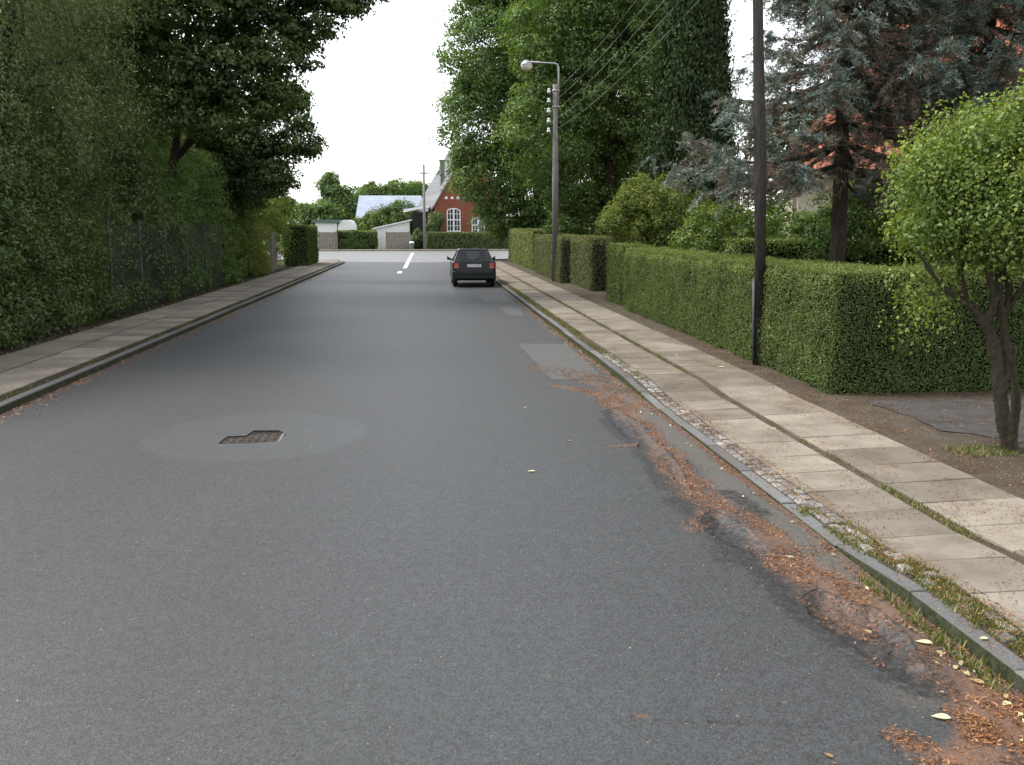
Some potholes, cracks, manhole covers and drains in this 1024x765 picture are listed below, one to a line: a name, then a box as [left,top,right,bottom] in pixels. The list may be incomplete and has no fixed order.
pothole [697,509,772,558]
pothole [800,587,932,689]
